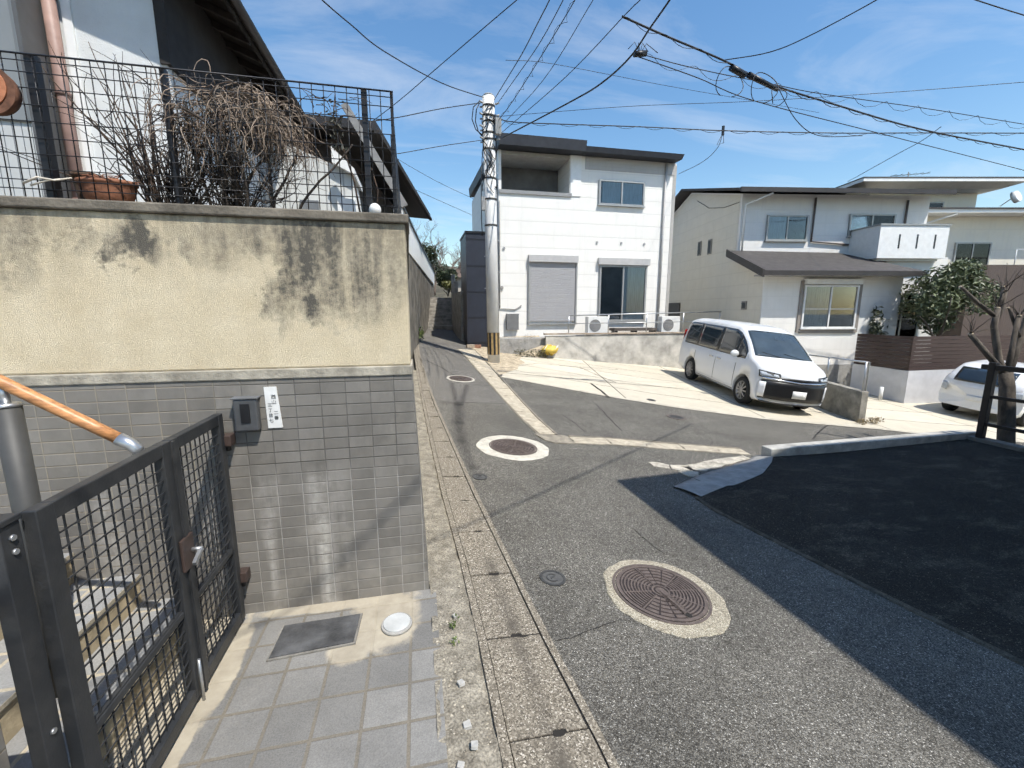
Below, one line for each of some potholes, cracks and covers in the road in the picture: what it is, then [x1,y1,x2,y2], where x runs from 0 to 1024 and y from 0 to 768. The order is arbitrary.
manhole cover [603,560,731,638]
manhole cover [476,435,549,461]
utility cover [381,612,412,636]
utility cover [540,570,566,586]
